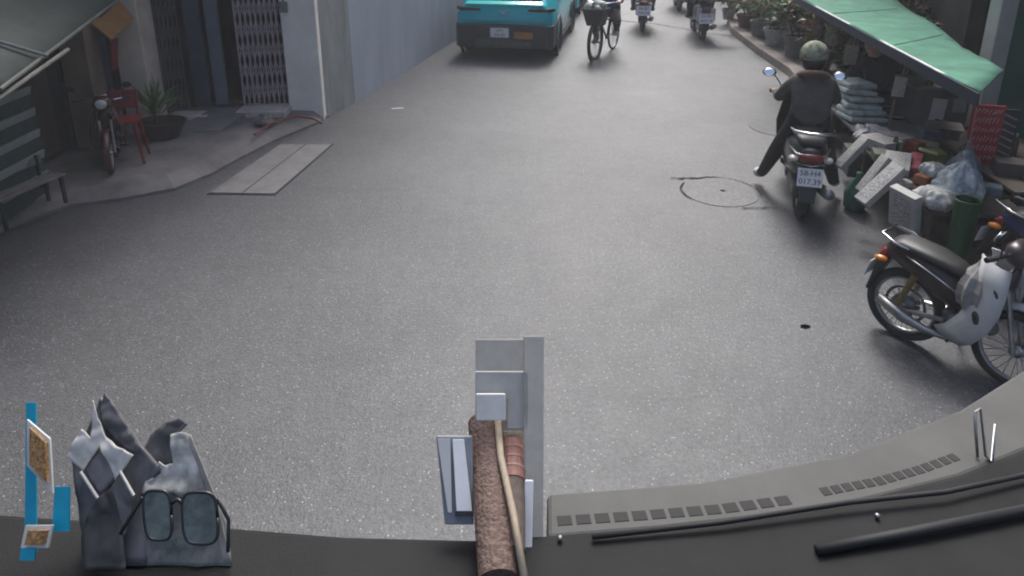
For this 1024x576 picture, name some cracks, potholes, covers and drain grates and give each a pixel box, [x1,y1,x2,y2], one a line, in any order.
manhole cover [672,176,770,208]
